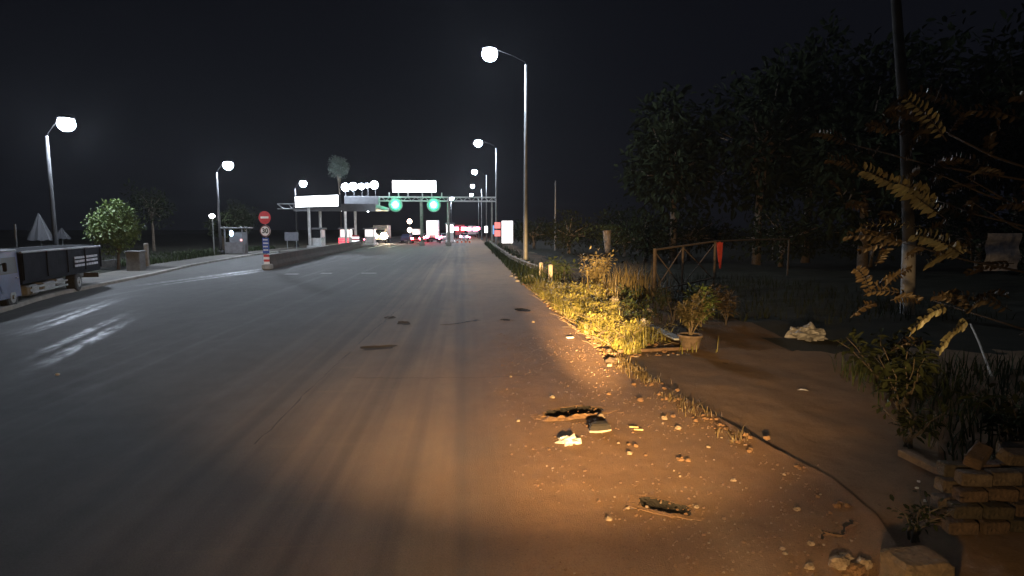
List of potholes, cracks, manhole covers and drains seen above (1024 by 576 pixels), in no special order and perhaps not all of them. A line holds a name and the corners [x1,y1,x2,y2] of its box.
pothole [342,343,410,352]
pothole [530,404,619,421]
crack [818,519,859,540]
pothole [627,493,704,521]
